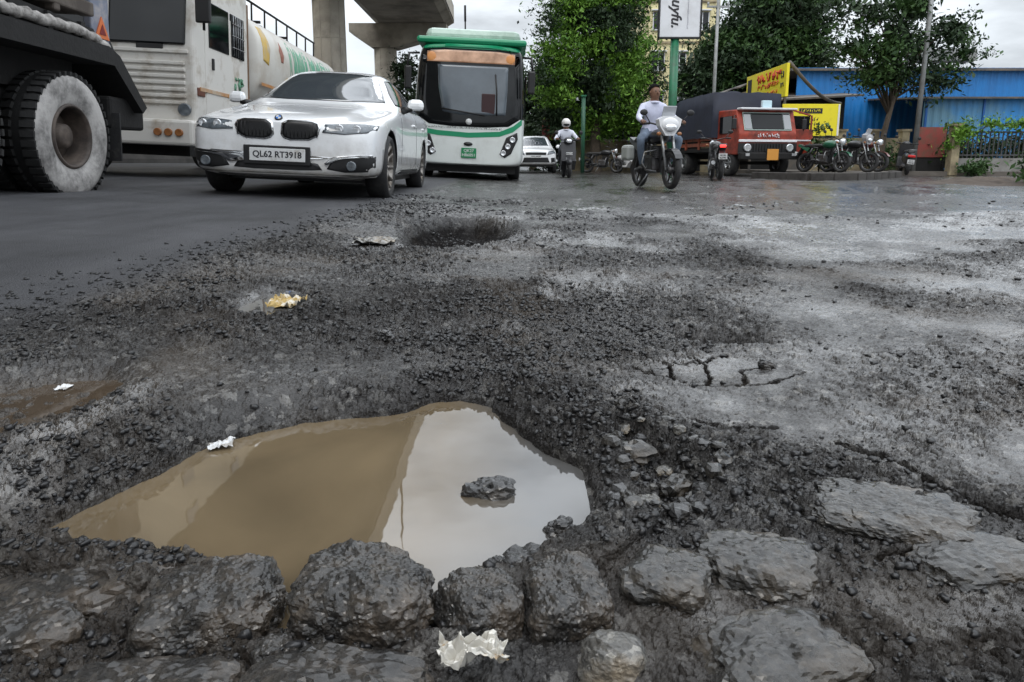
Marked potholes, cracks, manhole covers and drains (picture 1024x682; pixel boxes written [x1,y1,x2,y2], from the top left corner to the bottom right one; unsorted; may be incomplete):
pothole [0,381,619,629]
pothole [209,279,325,319]
pothole [378,212,532,251]
pothole [0,351,170,442]
crack [602,344,817,391]
